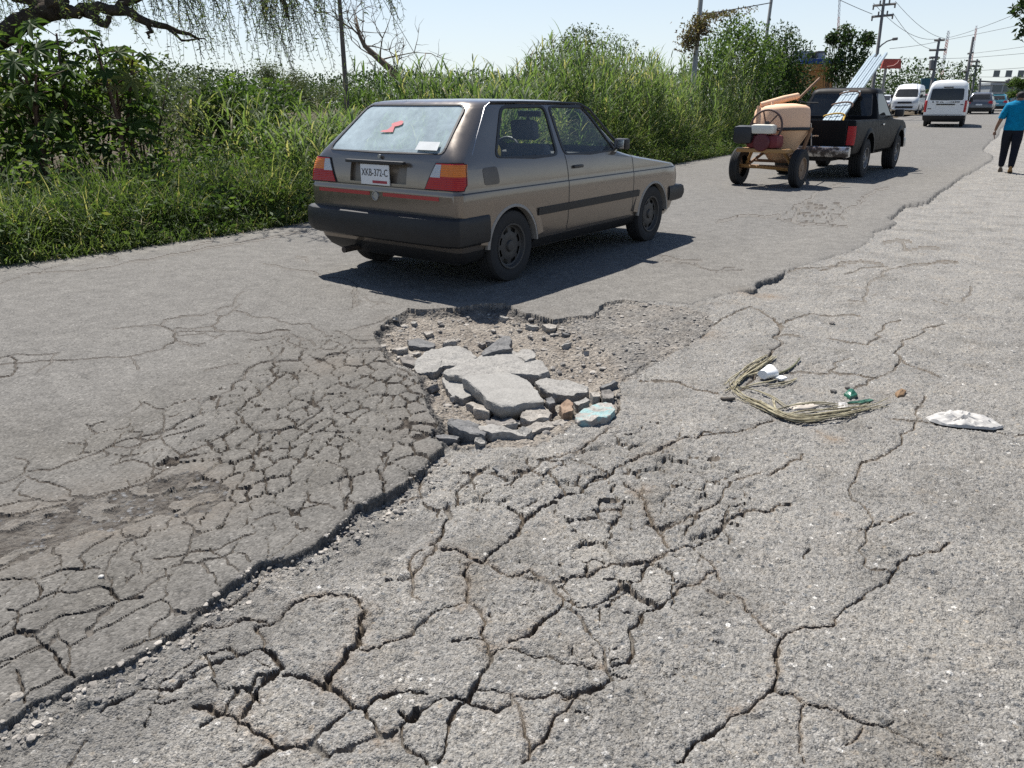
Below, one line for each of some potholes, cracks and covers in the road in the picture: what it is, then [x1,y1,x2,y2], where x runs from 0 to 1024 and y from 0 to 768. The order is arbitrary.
pothole [374,299,714,452]
crack [0,291,812,768]
crack [617,182,973,414]
